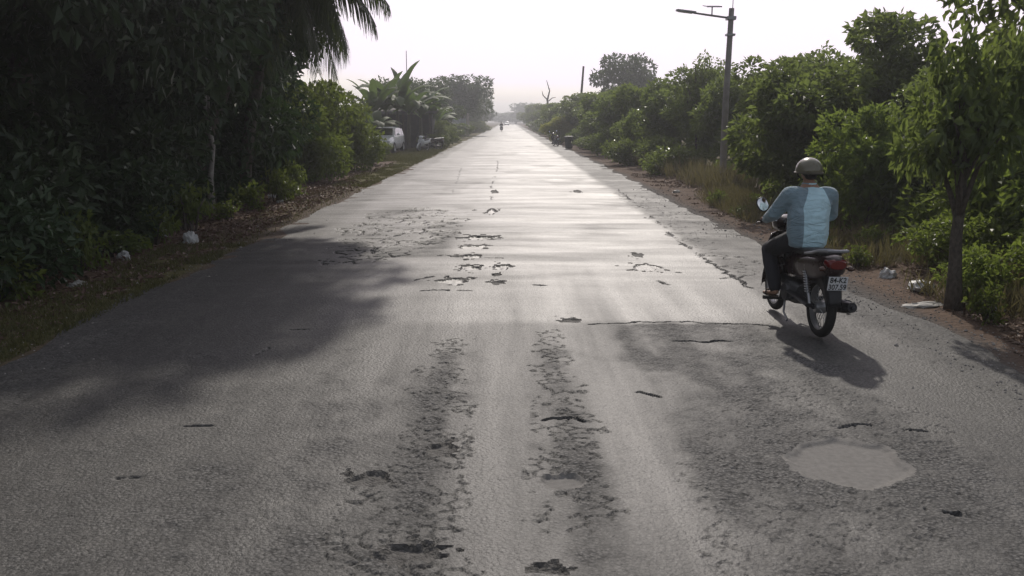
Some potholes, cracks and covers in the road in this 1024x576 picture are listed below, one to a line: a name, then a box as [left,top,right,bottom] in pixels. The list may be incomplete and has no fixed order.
crack [614,193,761,285]
pothole [536,473,586,490]
pothole [525,559,578,576]
pothole [427,275,478,286]
pothole [339,468,397,487]
pothole [455,234,504,242]
pothole [453,264,484,273]
pothole [425,437,465,461]
pothole [489,261,515,271]
pothole [454,252,482,260]
